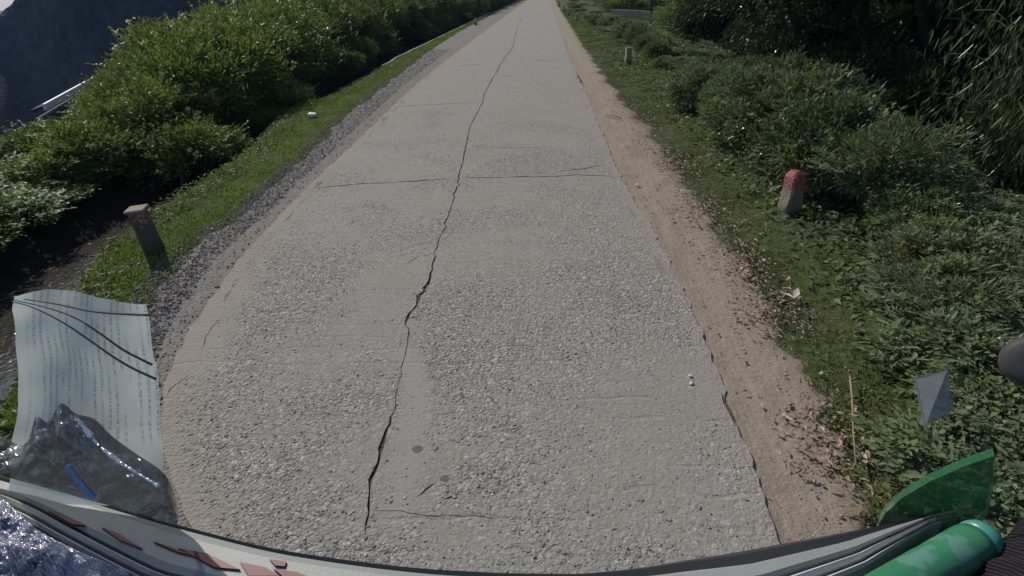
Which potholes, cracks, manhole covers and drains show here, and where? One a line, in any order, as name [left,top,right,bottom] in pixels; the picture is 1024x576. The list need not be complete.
crack [365,20,521,532]
